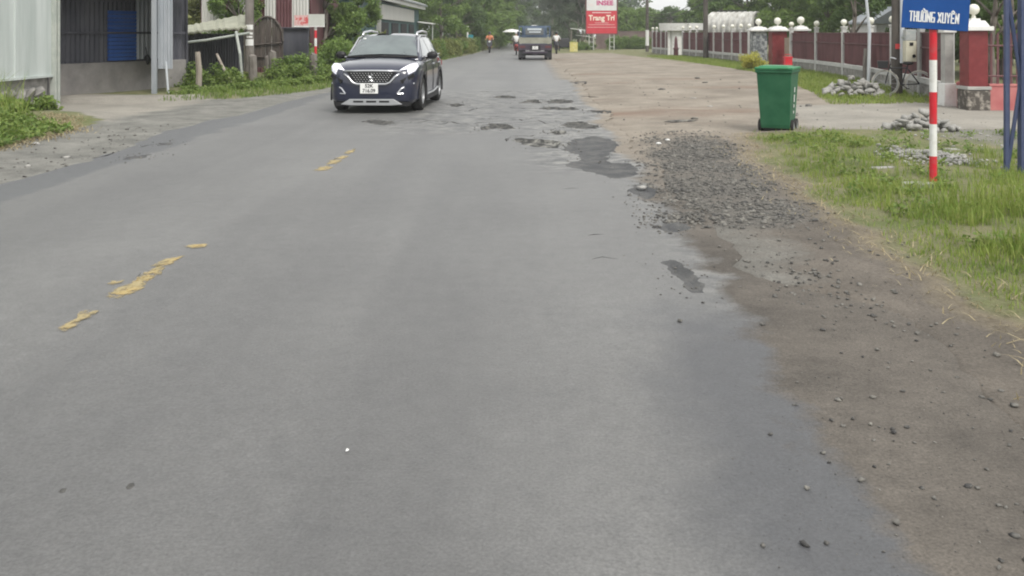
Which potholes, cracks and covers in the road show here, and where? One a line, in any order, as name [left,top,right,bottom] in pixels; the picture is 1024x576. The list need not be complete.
pothole [513,138,562,148]
pothole [562,121,600,129]
pothole [660,260,705,293]
